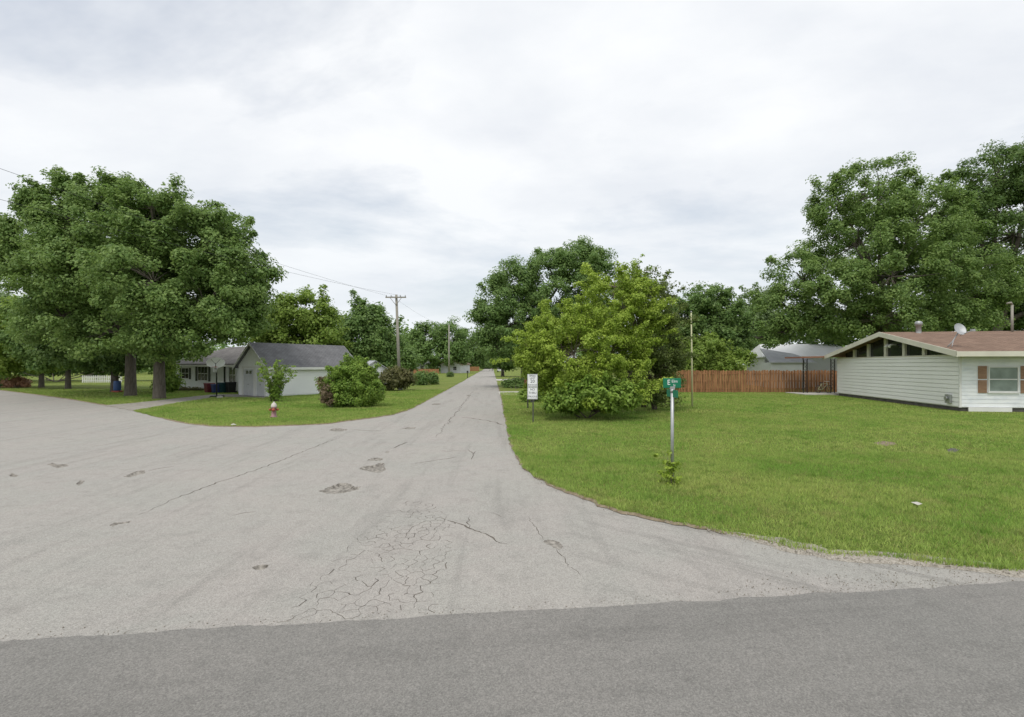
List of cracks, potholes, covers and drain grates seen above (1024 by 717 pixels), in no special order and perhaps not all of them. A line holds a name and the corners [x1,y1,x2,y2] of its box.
pothole [319,483,360,494]
crack [139,438,338,515]
crack [281,501,506,622]
pothole [360,463,386,473]
pothole [543,540,563,550]
